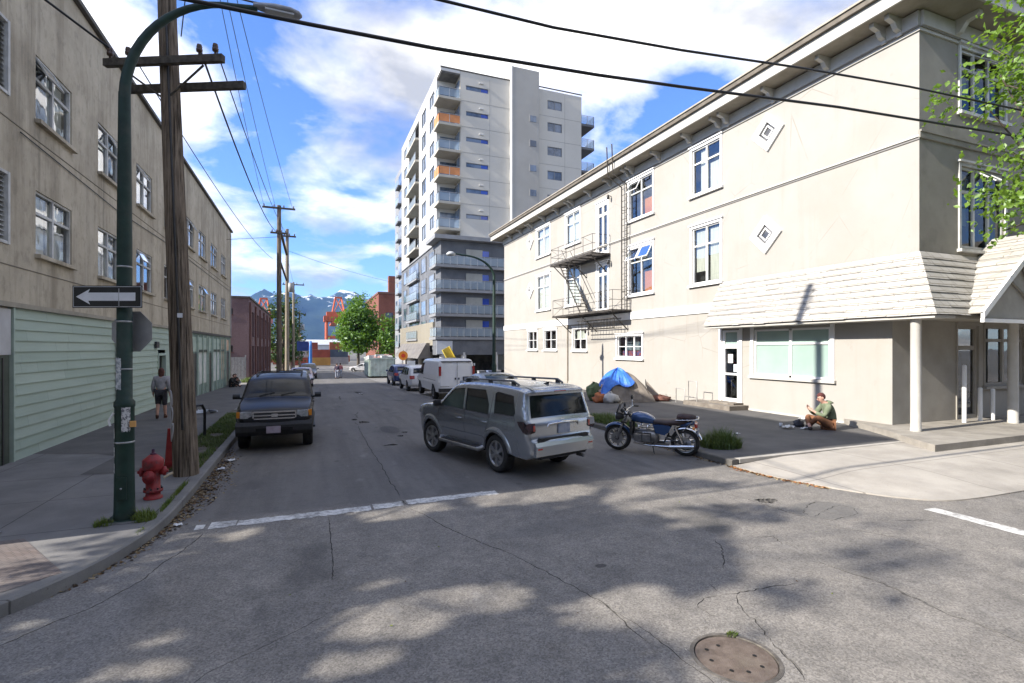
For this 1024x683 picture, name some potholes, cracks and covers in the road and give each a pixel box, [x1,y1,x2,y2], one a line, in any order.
crack [339,396,714,683]
crack [729,494,946,552]
manhole cover [690,633,784,683]
crack [697,540,805,680]
